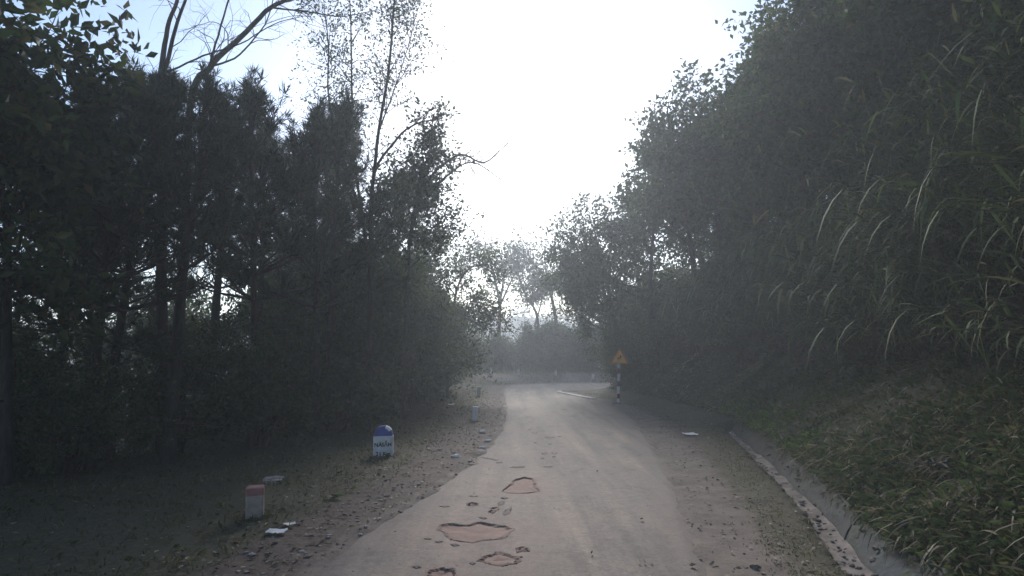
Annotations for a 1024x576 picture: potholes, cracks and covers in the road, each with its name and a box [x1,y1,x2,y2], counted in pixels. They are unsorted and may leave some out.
pothole [502,477,541,493]
pothole [436,521,515,543]
pothole [425,567,458,576]
pothole [476,551,523,567]
